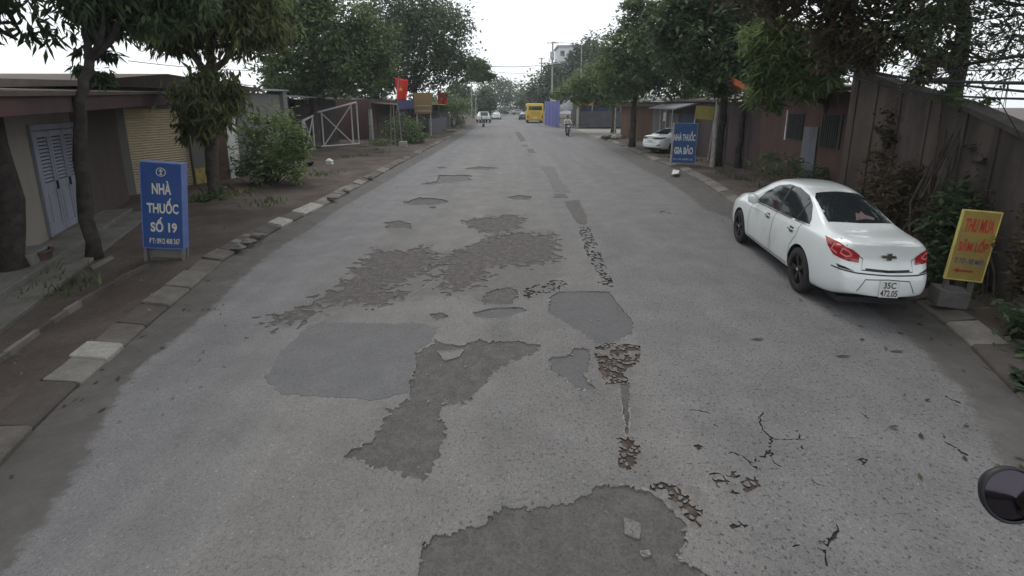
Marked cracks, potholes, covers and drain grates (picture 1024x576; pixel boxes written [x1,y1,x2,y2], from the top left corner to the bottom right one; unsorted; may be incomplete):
pothole [403,197,448,206]
pothole [418,483,708,576]
crack [594,343,805,527]
crack [792,524,840,567]
pothole [423,175,473,185]
pothole [383,221,412,229]
